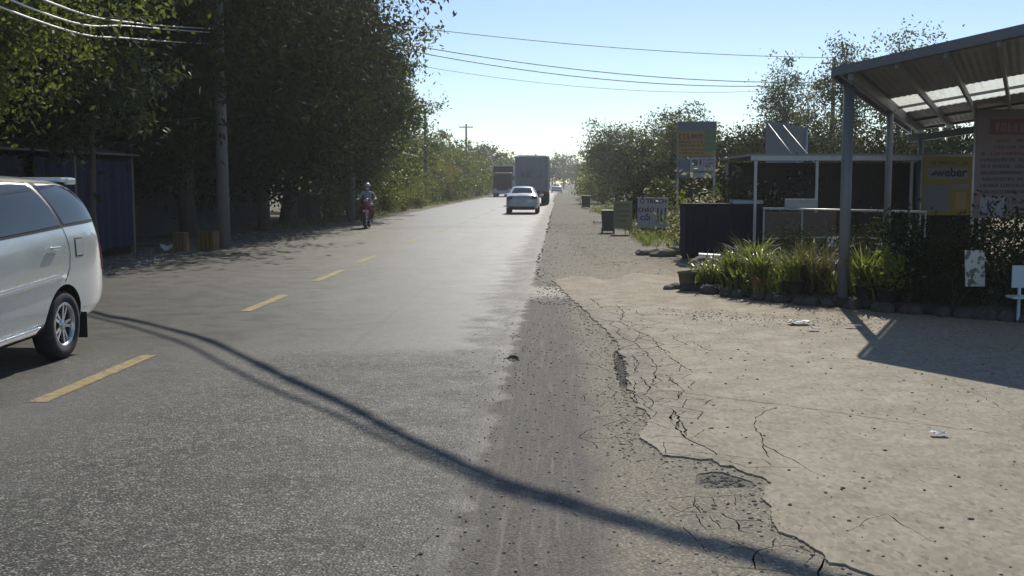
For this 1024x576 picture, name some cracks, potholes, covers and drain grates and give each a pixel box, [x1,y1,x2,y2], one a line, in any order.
crack [579,298,1020,473]
crack [669,495,824,576]
pothole [695,472,755,489]
pothole [613,351,627,391]
